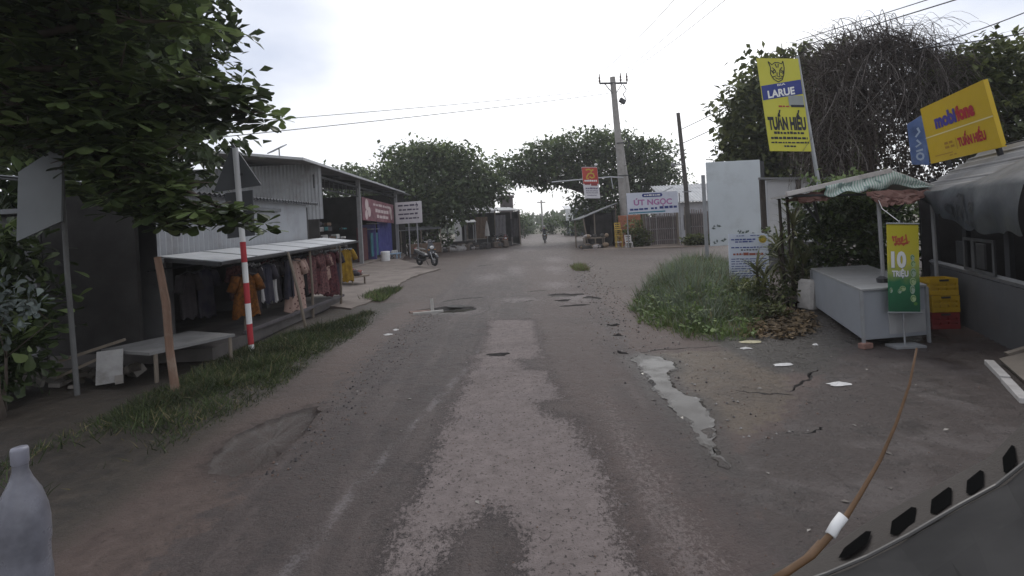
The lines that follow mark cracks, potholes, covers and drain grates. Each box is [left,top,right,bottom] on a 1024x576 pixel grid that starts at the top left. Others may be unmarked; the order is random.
pothole [415,306,476,315]
pothole [206,406,322,478]
crack [736,370,818,395]
